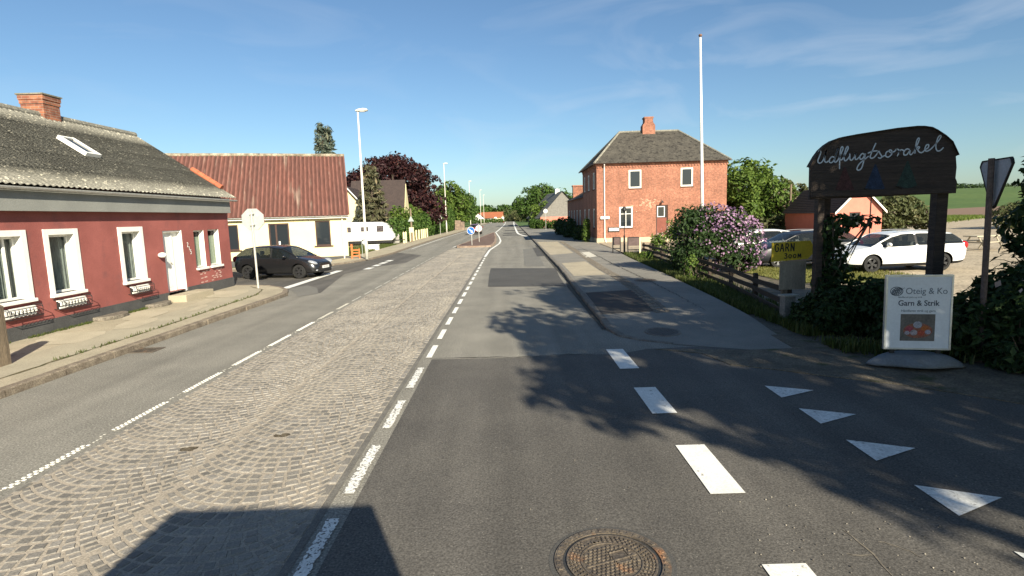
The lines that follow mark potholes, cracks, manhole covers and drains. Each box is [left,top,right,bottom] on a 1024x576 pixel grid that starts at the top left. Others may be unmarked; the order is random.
manhole cover [549,527,678,576]
crack [845,531,918,576]
